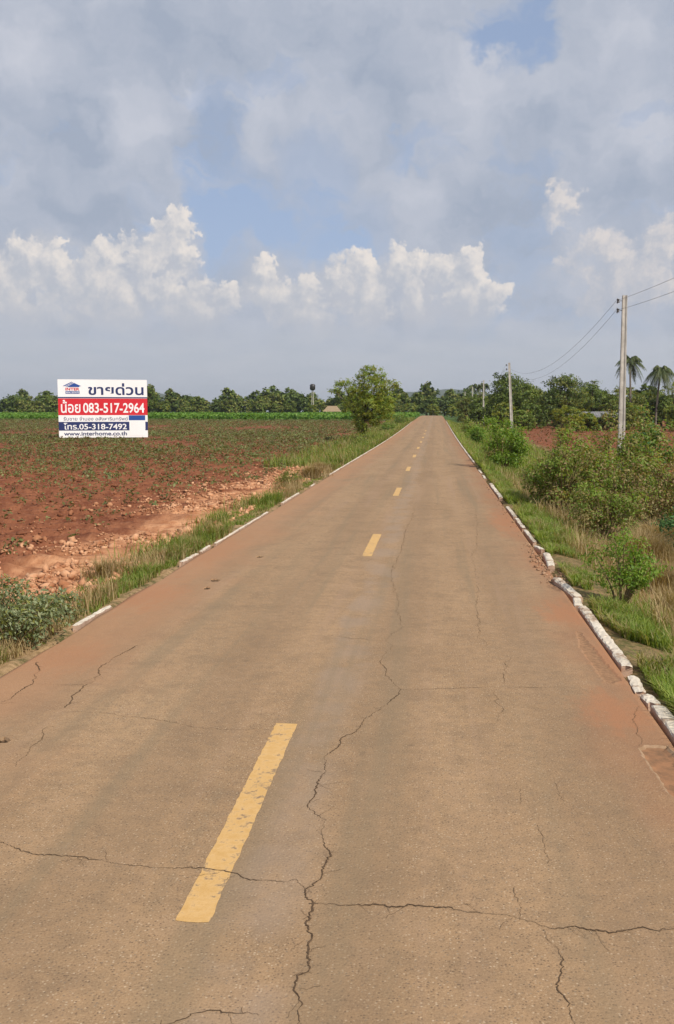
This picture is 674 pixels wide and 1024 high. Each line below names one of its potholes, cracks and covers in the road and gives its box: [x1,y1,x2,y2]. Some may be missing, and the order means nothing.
crack [0,512,674,1022]
